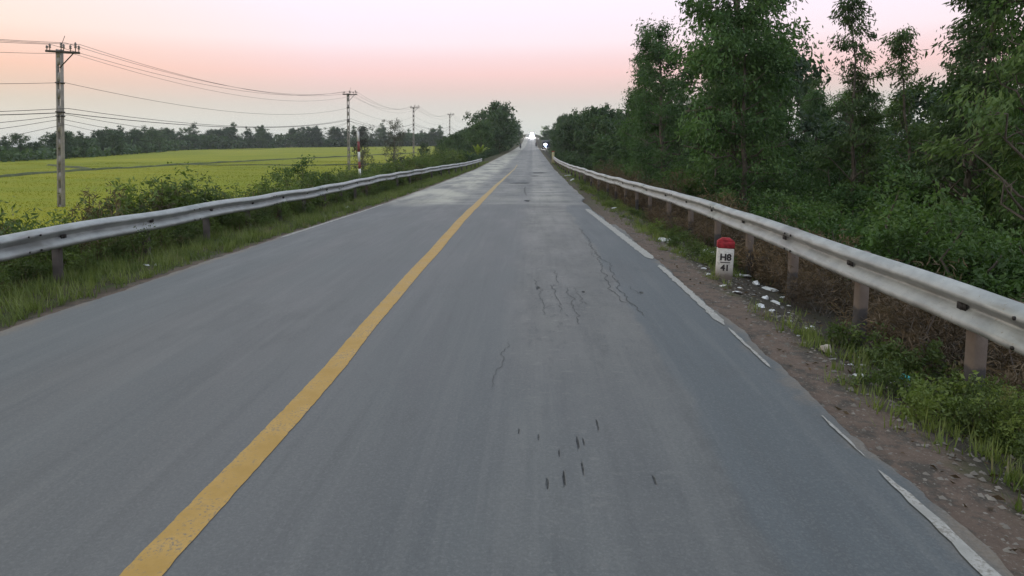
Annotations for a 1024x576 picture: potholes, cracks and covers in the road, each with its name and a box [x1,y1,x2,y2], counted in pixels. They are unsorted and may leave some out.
crack [582,230,644,315]
crack [534,265,589,324]
